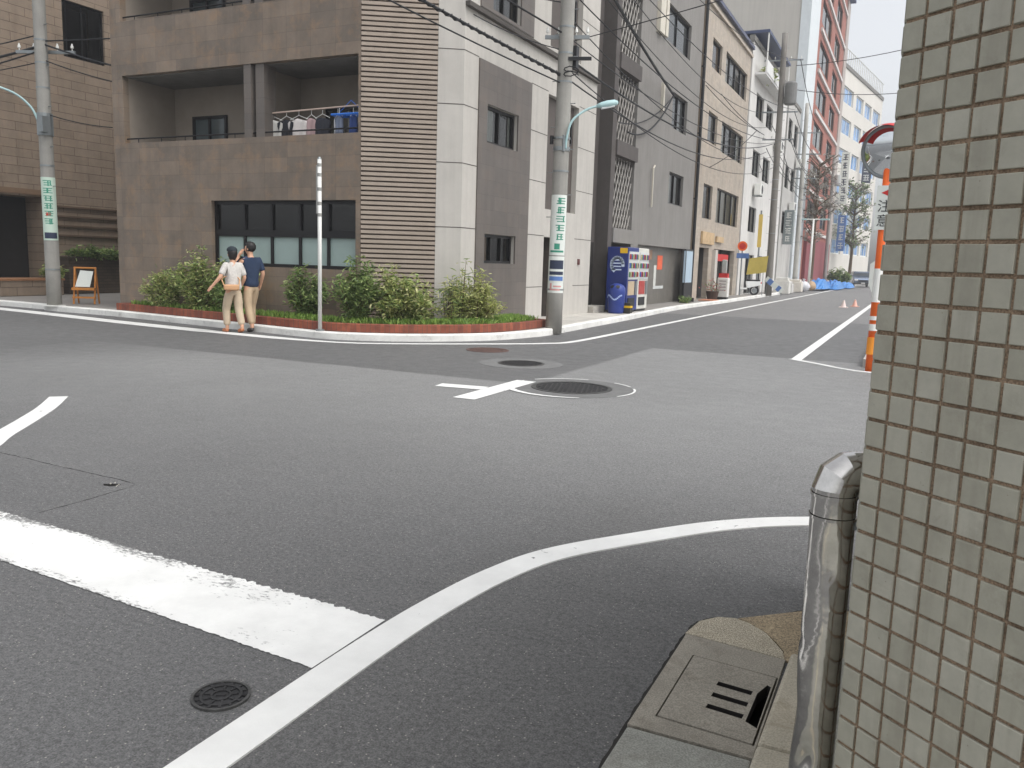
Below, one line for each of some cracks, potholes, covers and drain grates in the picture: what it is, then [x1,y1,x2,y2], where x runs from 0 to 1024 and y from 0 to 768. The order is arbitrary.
manhole cover [509,378,636,398]
manhole cover [479,358,563,369]
manhole cover [190,680,251,712]
